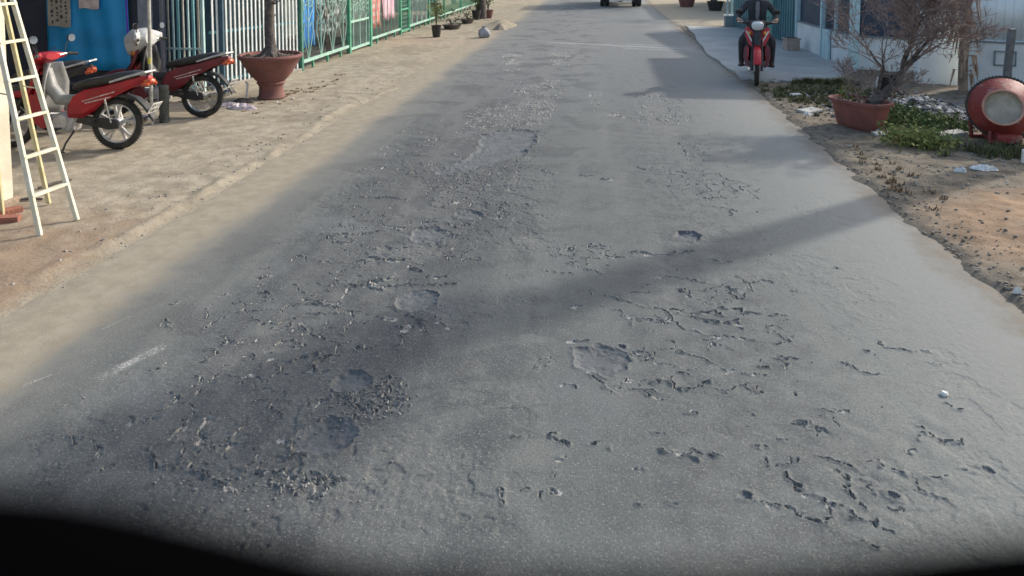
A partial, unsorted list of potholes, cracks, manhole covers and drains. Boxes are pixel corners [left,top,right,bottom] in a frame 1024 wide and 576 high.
pothole [407,226,453,244]
pothole [573,342,632,377]
crack [126,53,759,500]
pothole [394,289,440,312]
crack [541,242,798,400]
pothole [330,369,374,394]
pothole [288,415,360,455]
pothole [431,128,540,175]
pothole [674,230,702,241]
crack [752,408,968,548]
